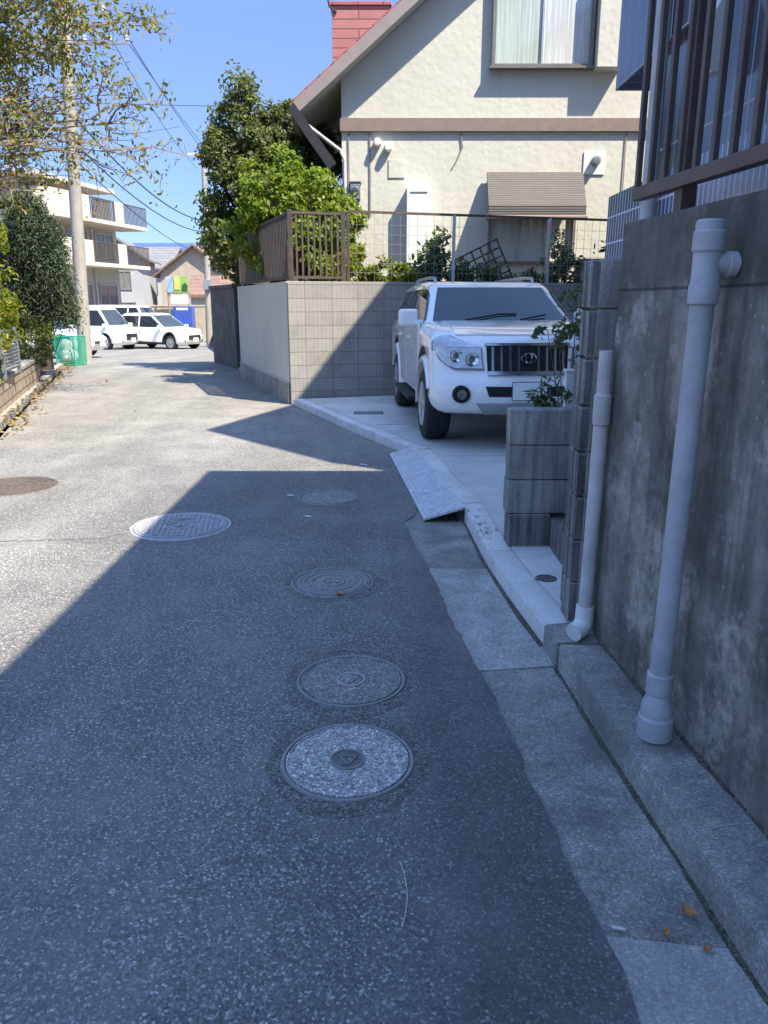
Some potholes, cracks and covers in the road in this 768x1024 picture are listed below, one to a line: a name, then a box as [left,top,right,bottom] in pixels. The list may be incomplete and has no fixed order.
manhole cover [285,649,420,717]
manhole cover [295,489,363,506]
manhole cover [283,565,384,602]
manhole cover [265,716,431,818]
manhole cover [129,512,232,541]
manhole cover [0,476,64,498]
